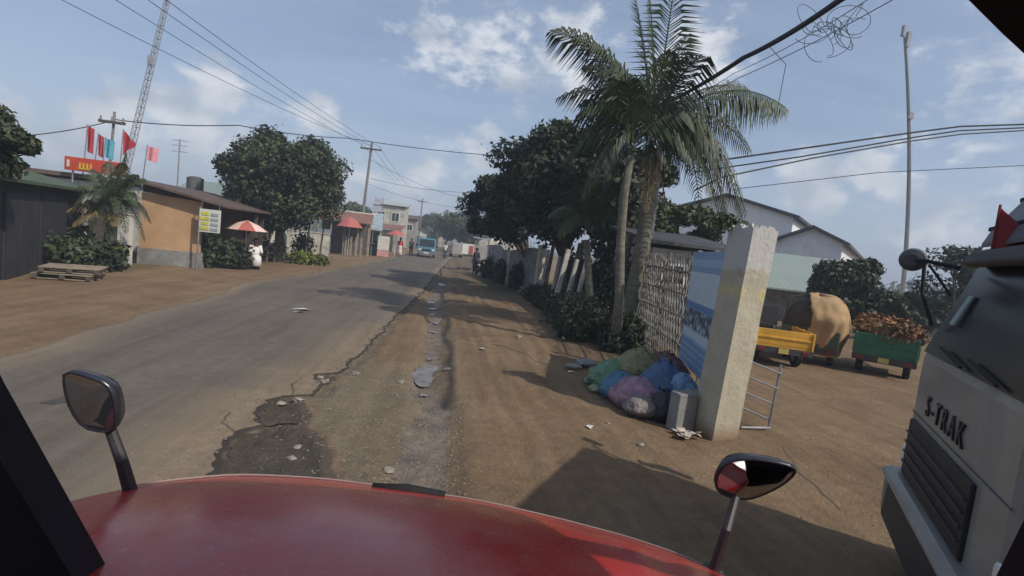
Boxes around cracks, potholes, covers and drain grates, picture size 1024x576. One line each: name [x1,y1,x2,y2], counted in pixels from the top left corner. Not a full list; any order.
pothole [260,398,301,426]
pothole [219,427,321,478]
crack [319,304,413,397]
